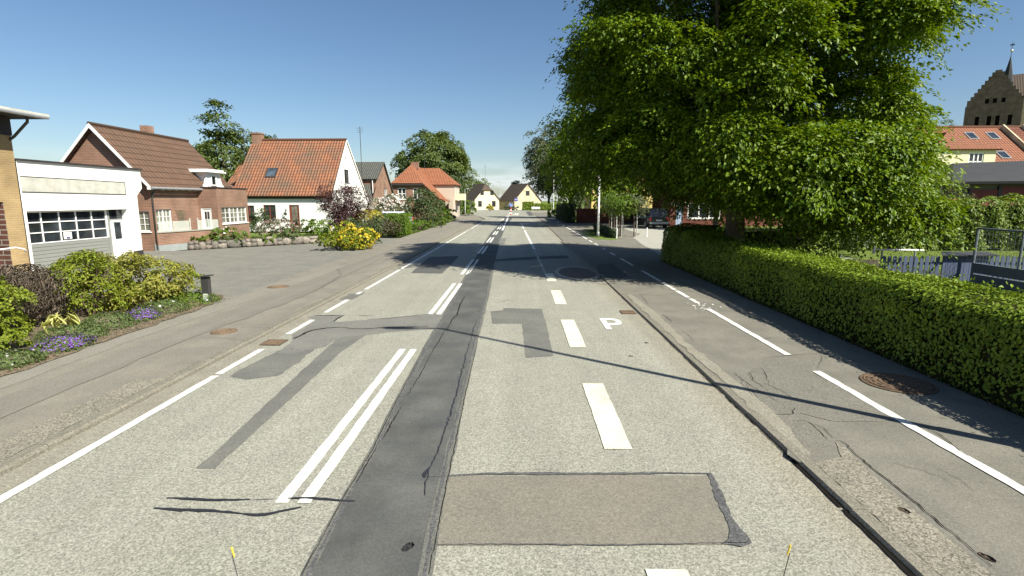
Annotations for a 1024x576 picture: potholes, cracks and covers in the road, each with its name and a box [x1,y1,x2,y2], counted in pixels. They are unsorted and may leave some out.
crack [736,374,832,437]
manhole cover [859,372,939,395]
